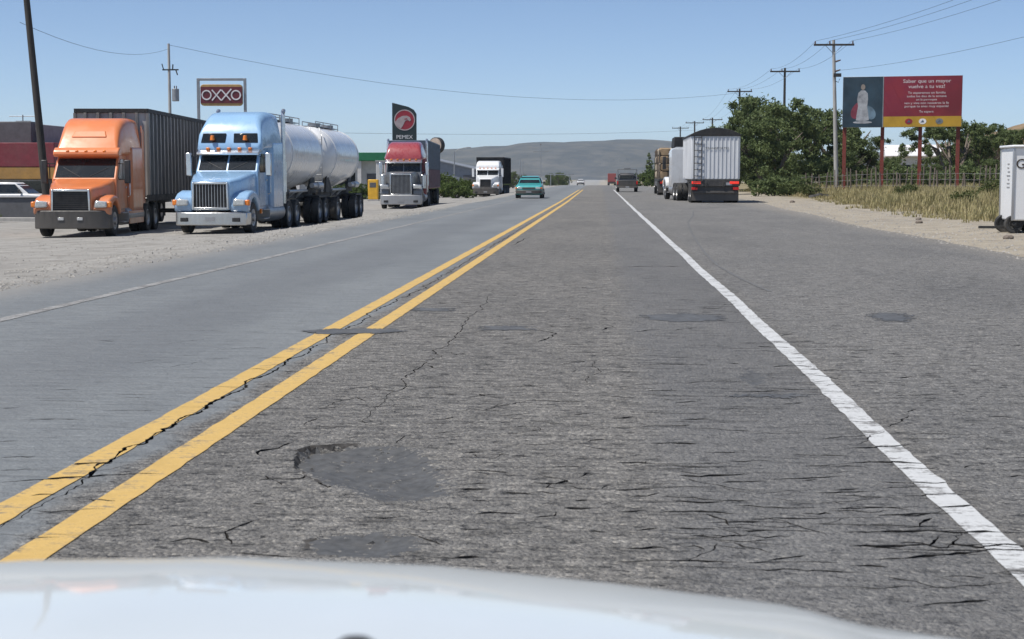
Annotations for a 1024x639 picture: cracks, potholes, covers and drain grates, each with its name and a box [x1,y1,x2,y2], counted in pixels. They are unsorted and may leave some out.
crack [172,287,1024,606]
